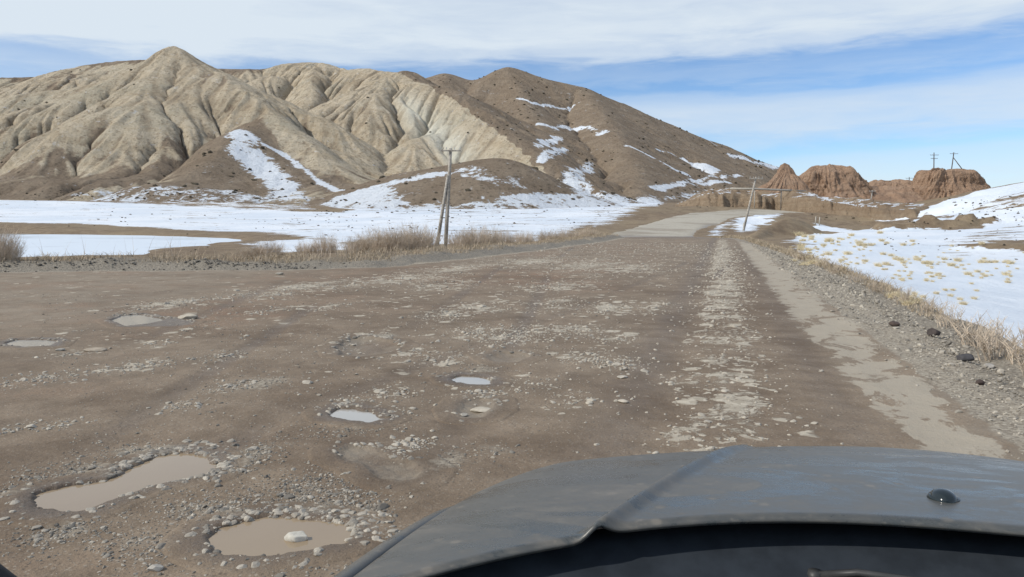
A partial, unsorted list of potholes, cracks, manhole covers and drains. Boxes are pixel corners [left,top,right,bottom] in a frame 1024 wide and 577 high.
pothole [307,436,459,495]
pothole [159,501,397,577]
pothole [0,442,252,528]
pothole [431,391,520,425]
pothole [0,336,78,350]
pothole [95,312,207,328]
